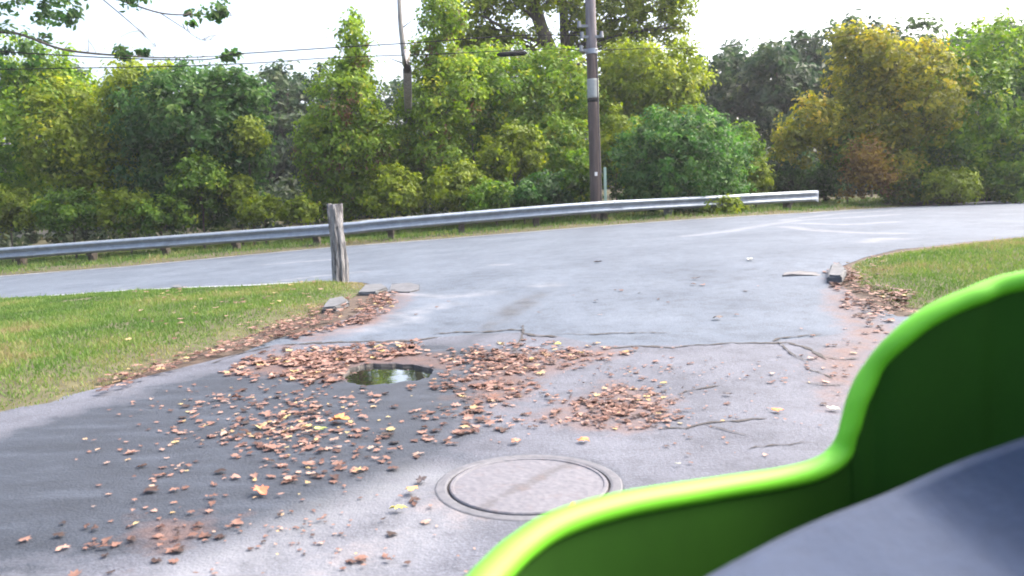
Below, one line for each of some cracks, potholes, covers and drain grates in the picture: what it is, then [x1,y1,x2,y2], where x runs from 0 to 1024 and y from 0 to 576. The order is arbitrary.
pothole [343,363,433,382]
crack [213,325,856,385]
crack [657,418,814,449]
manhole cover [435,454,623,521]
